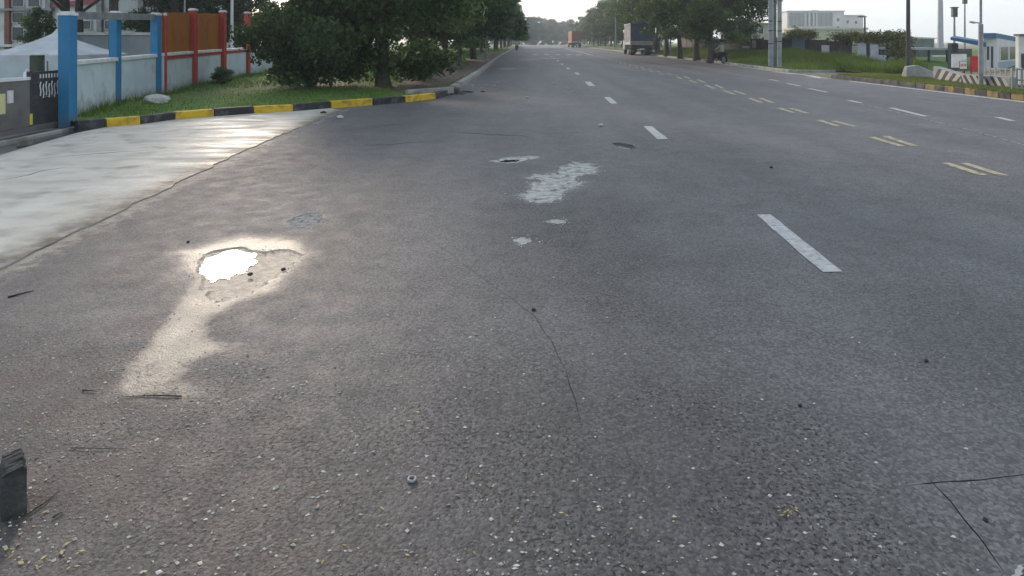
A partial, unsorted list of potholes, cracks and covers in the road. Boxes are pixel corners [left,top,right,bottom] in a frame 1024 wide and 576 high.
crack [901,474,1024,573]
pothole [196,246,304,303]
crack [431,241,581,427]
